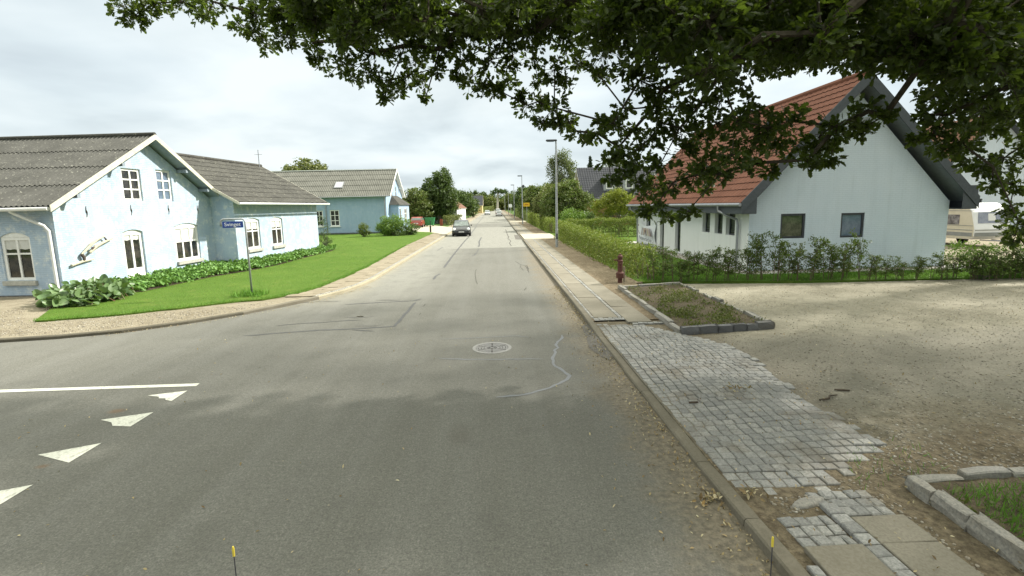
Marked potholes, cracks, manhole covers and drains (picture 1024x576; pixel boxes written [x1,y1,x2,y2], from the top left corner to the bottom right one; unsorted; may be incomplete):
manhole cover [472,342,512,354]
